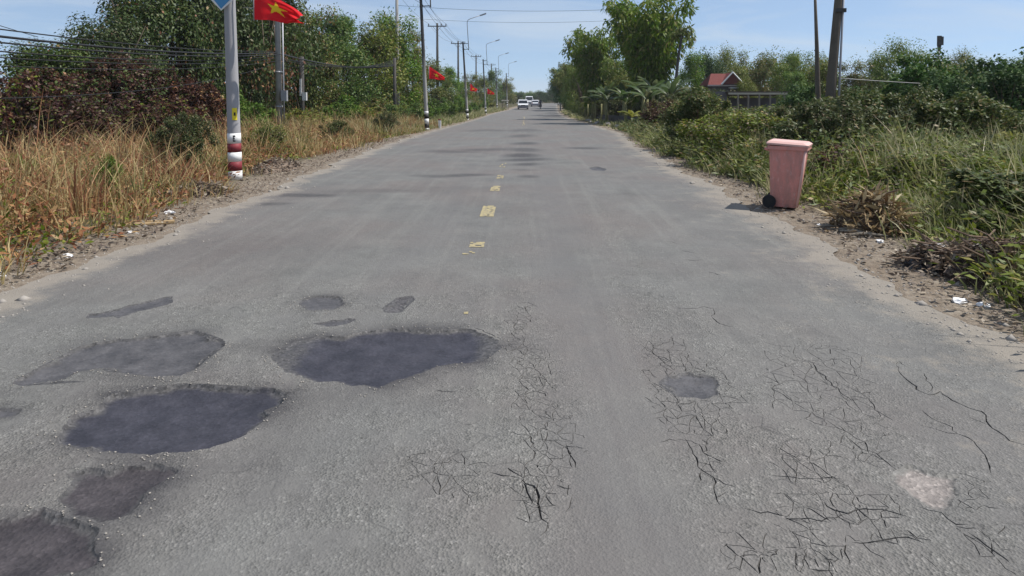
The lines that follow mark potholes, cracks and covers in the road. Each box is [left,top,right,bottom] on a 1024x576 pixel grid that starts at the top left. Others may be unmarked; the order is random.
crack [717,342,1024,576]
crack [401,302,587,535]
crack [640,337,747,505]
